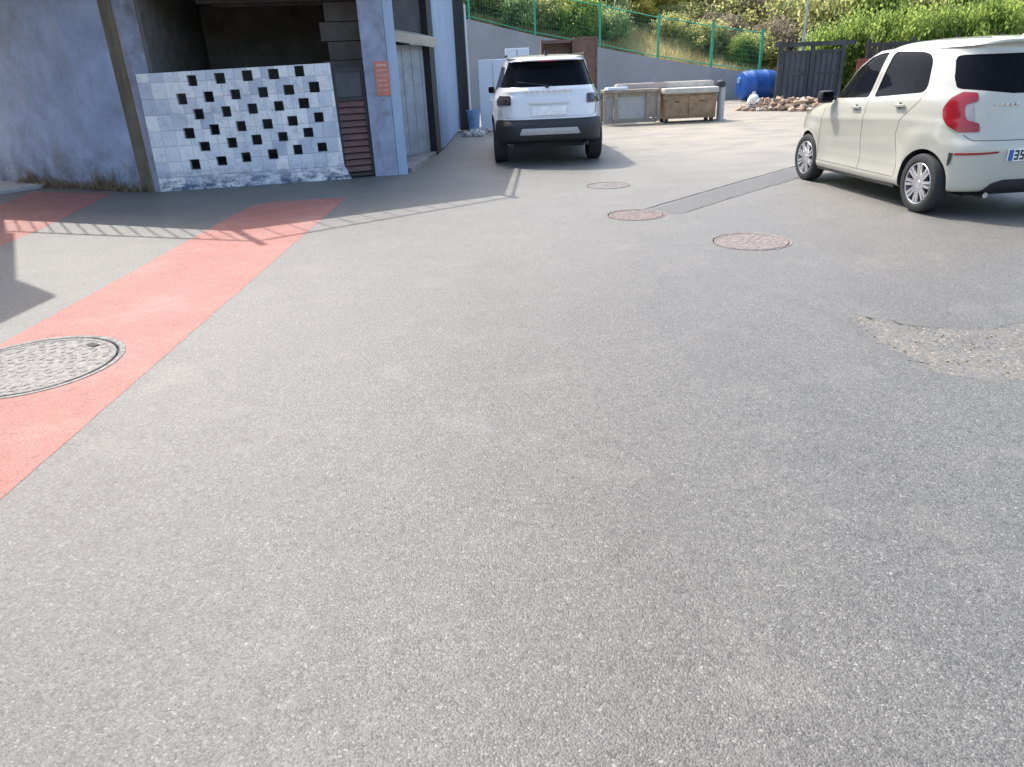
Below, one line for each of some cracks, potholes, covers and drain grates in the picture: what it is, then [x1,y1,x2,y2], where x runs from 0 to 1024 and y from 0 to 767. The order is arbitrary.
manhole cover [0,335,126,399]
manhole cover [606,209,666,221]
manhole cover [710,232,793,251]
